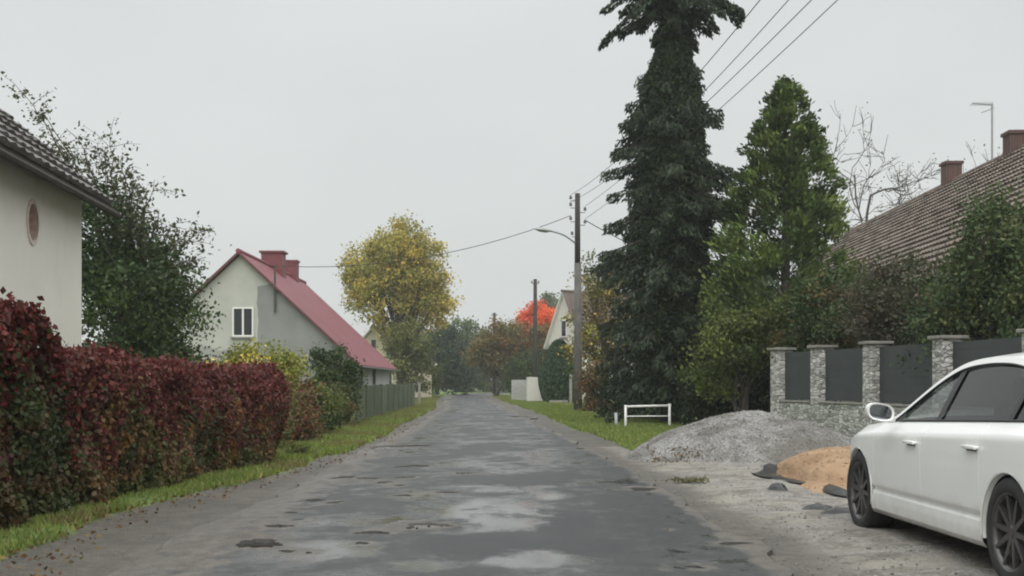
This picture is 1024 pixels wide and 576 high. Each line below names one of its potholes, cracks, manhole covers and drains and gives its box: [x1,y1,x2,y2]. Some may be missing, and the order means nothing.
pothole [234,539,284,548]
